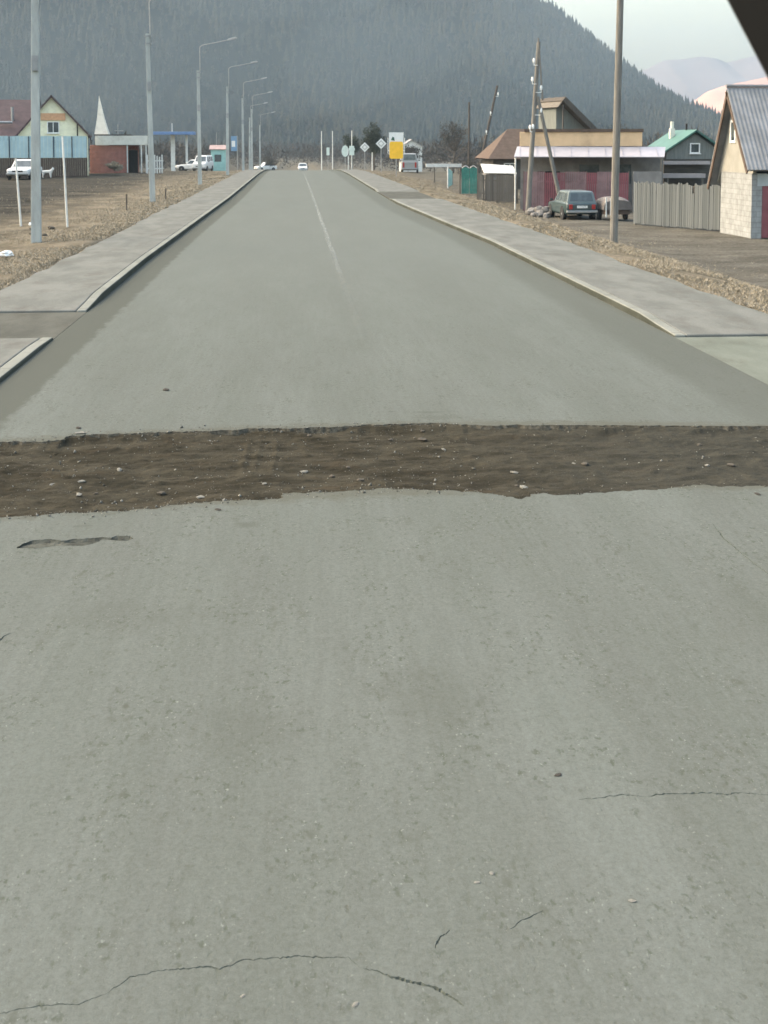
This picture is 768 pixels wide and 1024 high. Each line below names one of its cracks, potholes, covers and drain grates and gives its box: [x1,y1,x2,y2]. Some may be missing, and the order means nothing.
crack [579,792,764,800]
crack [0,955,464,1014]
pothole [17,535,134,549]
crack [713,524,768,574]
pothole [0,423,768,517]
